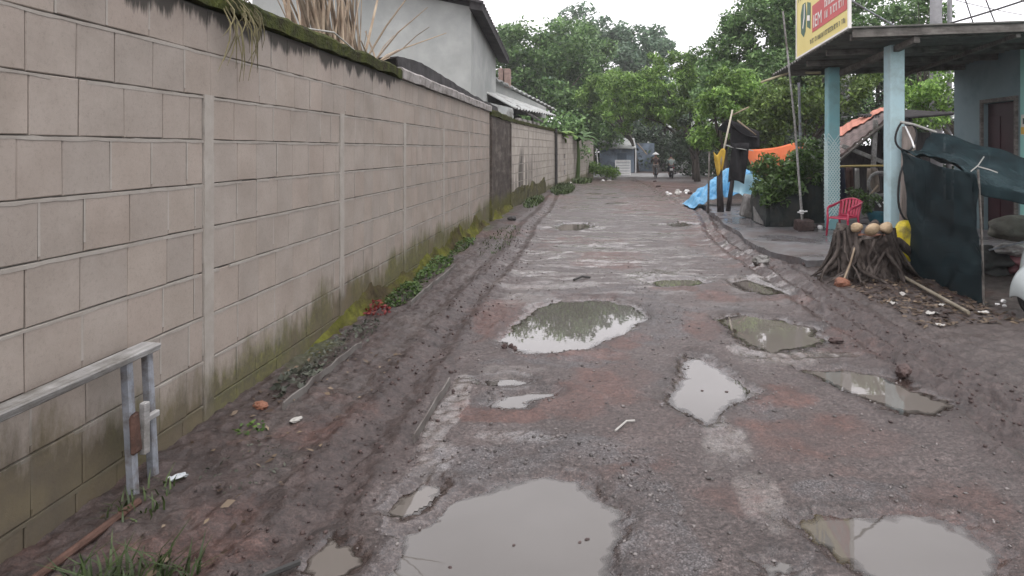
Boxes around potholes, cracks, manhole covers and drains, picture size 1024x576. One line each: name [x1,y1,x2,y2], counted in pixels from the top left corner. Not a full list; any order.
pothole [354,457,648,576]
pothole [705,310,841,355]
pothole [649,346,773,429]
pothole [275,518,382,576]
pothole [721,273,798,296]
pothole [463,367,547,387]
pothole [781,358,978,421]
pothole [469,380,573,413]
pothole [635,274,718,288]
pothole [550,221,597,232]
pothole [761,491,1024,576]
pothole [484,293,658,356]
